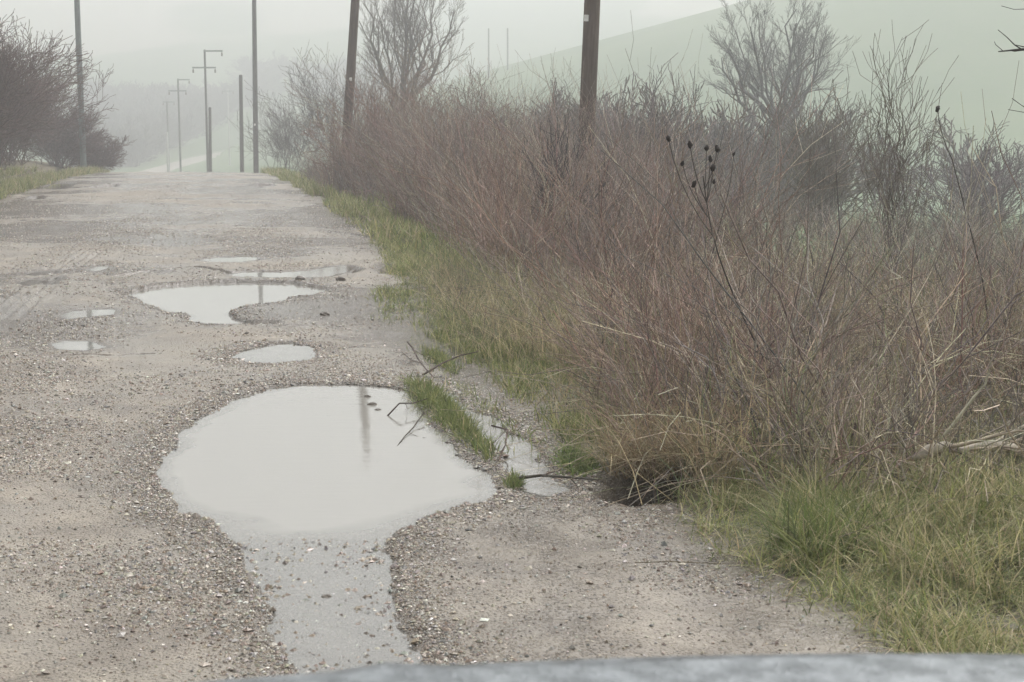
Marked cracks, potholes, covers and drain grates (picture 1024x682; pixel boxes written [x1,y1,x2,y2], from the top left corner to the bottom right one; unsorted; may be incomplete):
pothole [142,380,510,675]
pothole [579,470,702,508]
pothole [220,265,365,278]
pothole [48,307,122,319]
pothole [117,279,345,325]
